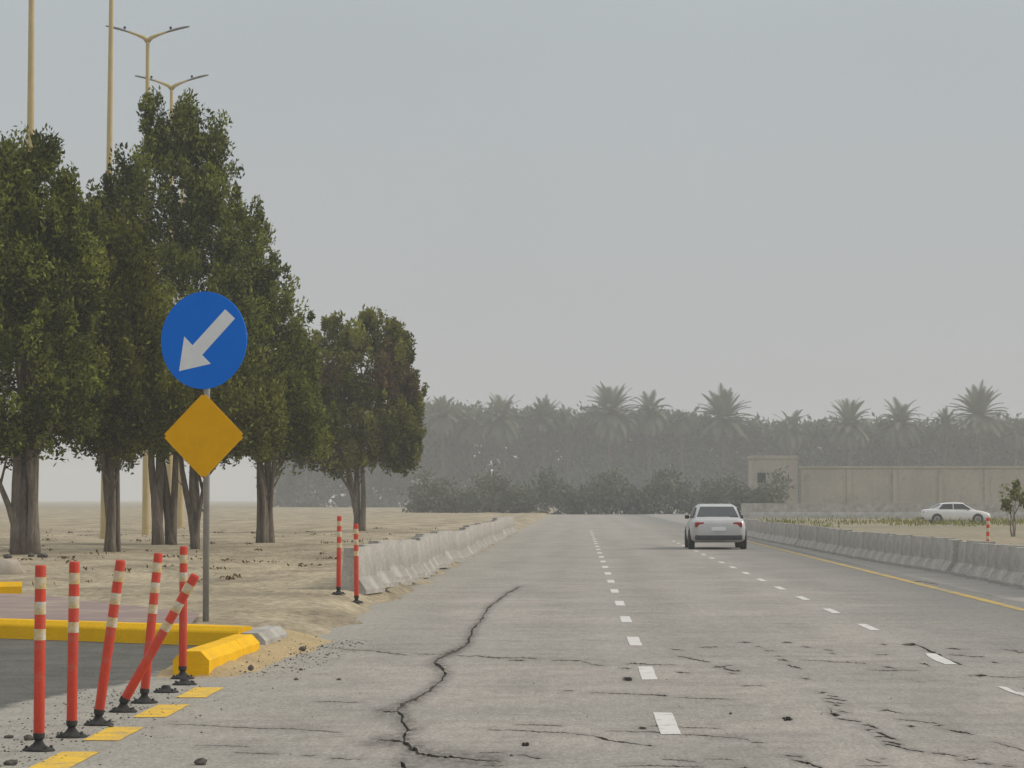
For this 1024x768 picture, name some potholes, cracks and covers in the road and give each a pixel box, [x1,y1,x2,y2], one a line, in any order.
crack [740,642,1024,767]
crack [339,587,763,768]
